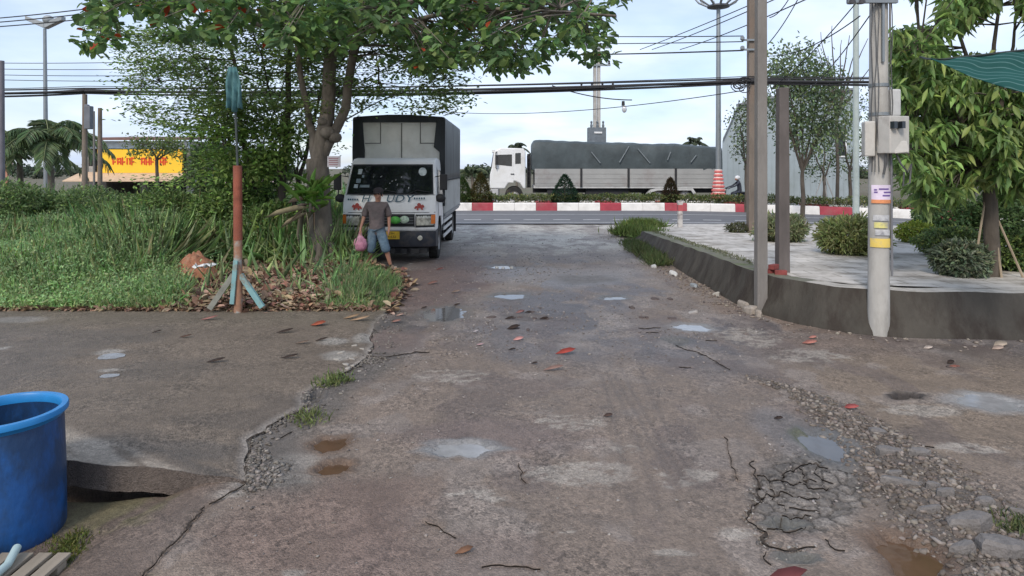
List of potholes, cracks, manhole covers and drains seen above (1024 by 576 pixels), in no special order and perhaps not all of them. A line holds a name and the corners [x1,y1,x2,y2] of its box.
pothole [411,304,474,325]
pothole [304,433,357,456]
pothole [784,425,870,473]
crack [142,407,305,576]
pothole [307,457,361,477]
pothole [939,390,1024,415]
pothole [883,391,929,401]
crack [339,329,429,377]
crack [724,437,845,565]
